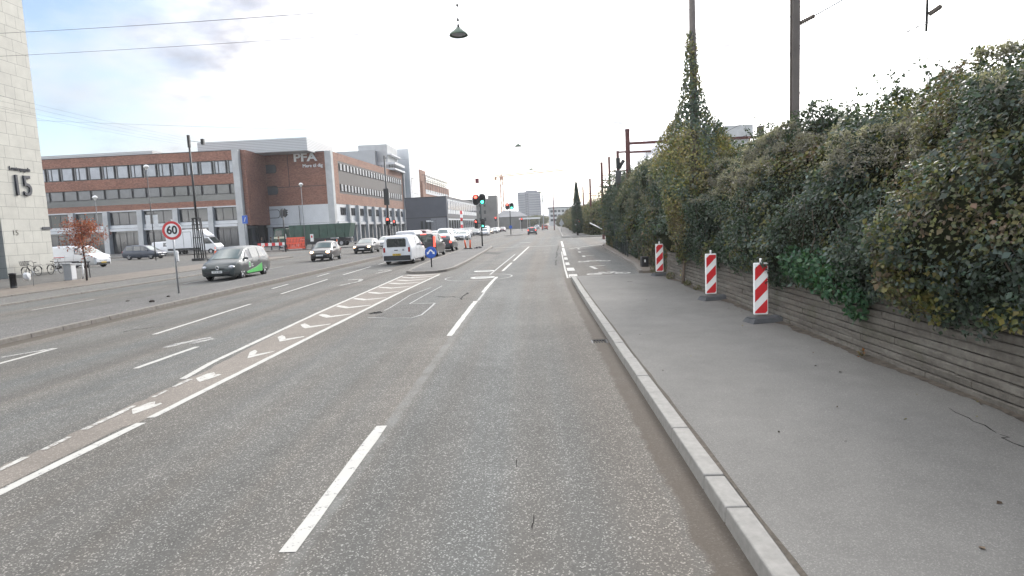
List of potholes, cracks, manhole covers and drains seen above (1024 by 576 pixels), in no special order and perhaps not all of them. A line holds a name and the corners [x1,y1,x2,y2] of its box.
crack [949,408,1024,447]
